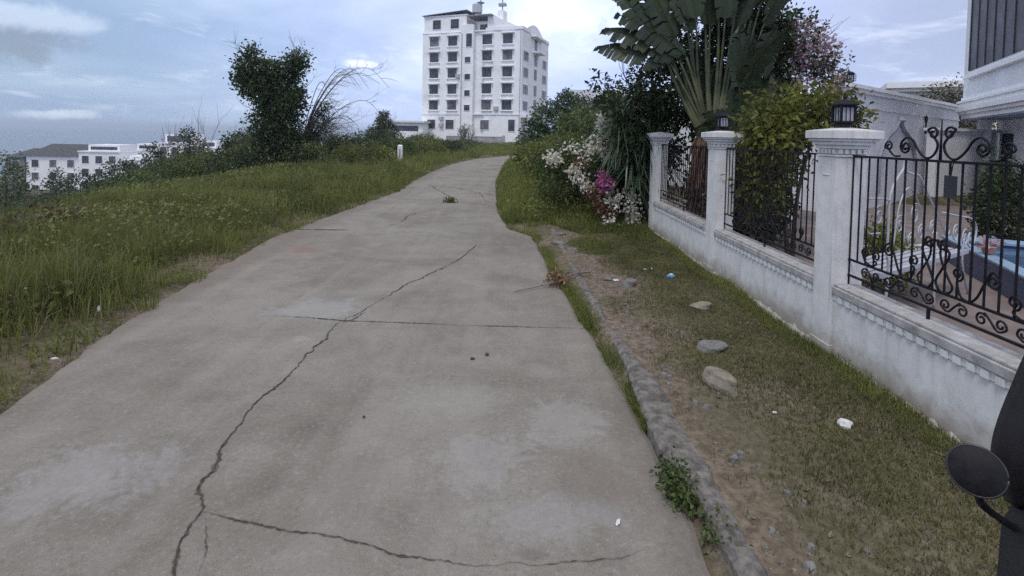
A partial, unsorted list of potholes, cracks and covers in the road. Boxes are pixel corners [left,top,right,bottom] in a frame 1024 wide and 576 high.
crack [171,246,644,576]
